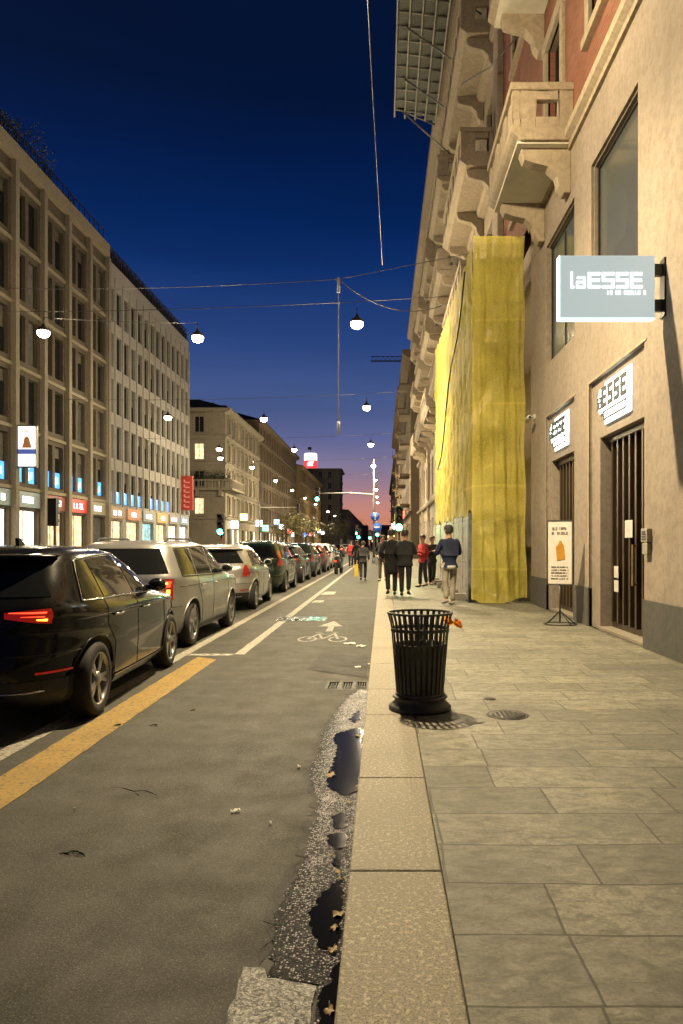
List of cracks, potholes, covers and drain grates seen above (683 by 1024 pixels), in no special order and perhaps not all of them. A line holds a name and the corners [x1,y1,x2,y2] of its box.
manhole cover [486,710,529,720]
drain grate [324,681,369,690]
